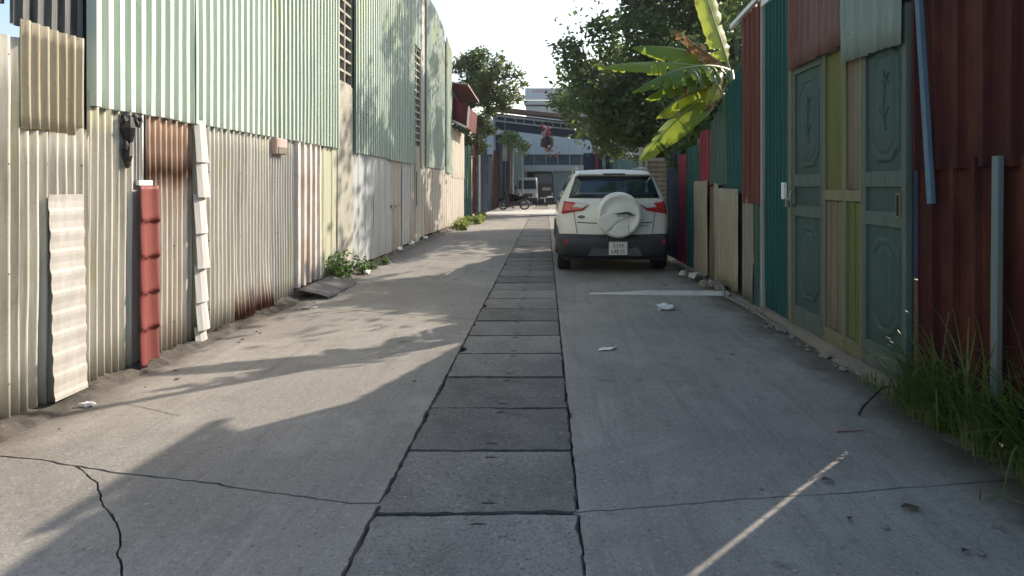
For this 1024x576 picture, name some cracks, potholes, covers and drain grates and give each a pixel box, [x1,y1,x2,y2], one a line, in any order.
crack [55,463,380,576]
